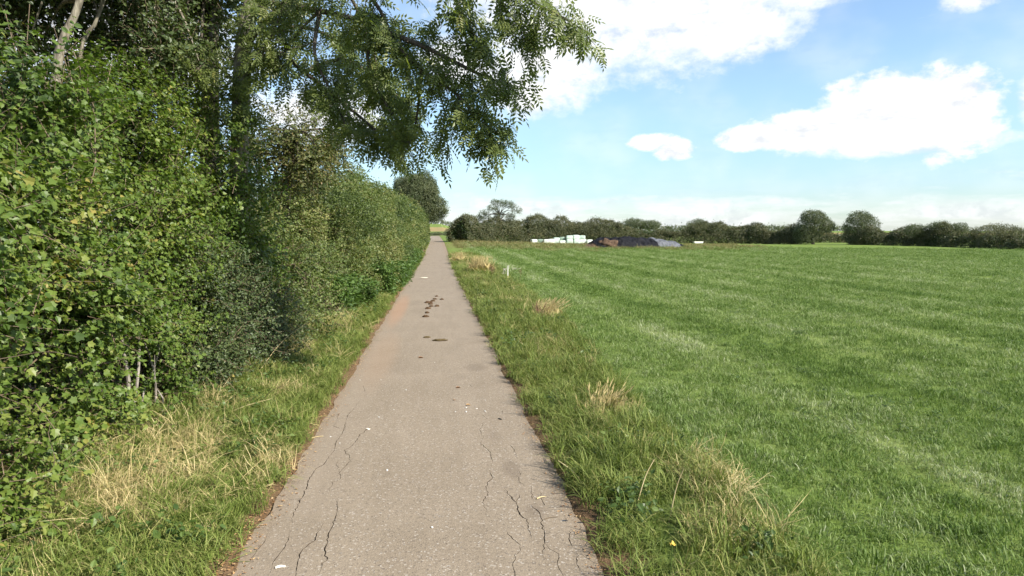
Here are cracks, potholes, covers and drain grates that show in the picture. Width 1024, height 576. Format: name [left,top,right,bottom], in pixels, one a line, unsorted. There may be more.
crack [480,425,580,576]
crack [250,406,366,576]
